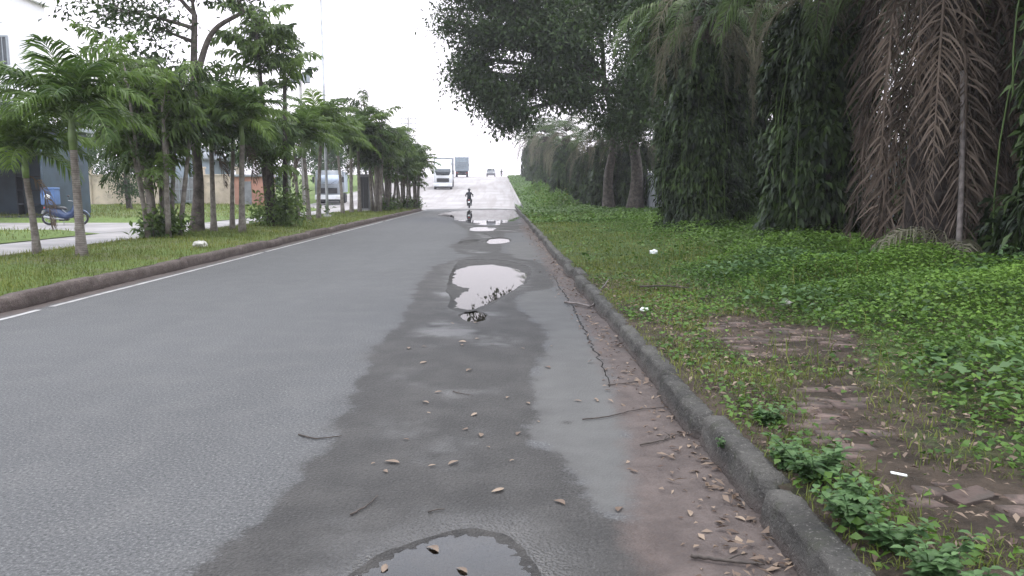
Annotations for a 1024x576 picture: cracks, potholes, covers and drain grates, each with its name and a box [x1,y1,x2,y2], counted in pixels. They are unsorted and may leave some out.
pothole [436,209,522,225]
pothole [446,259,533,312]
crack [536,260,610,387]
pothole [458,310,488,322]
pothole [348,528,542,576]
